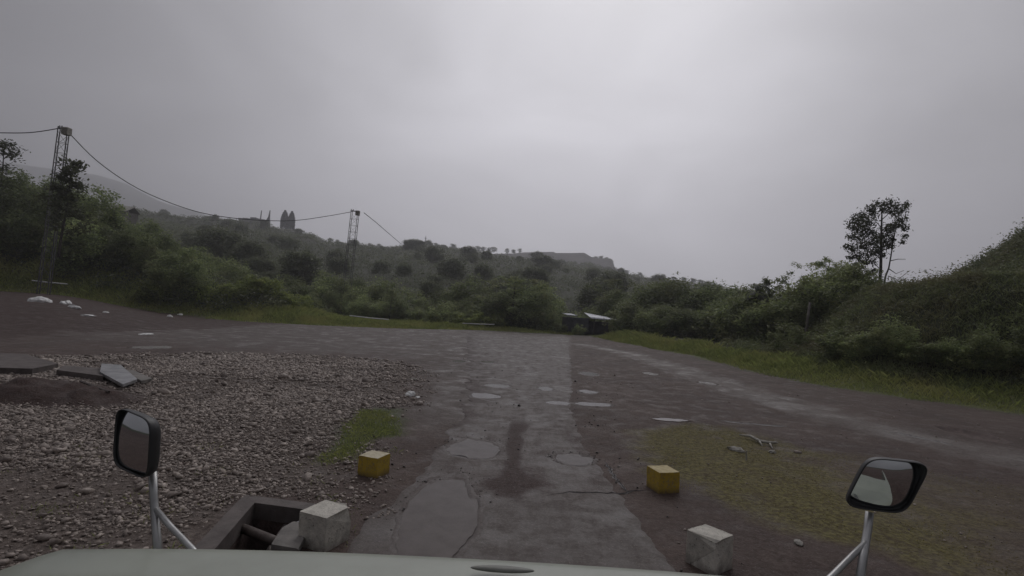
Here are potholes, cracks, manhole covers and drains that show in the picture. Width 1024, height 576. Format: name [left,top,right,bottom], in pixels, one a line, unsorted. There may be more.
crack [552,462,643,495]
